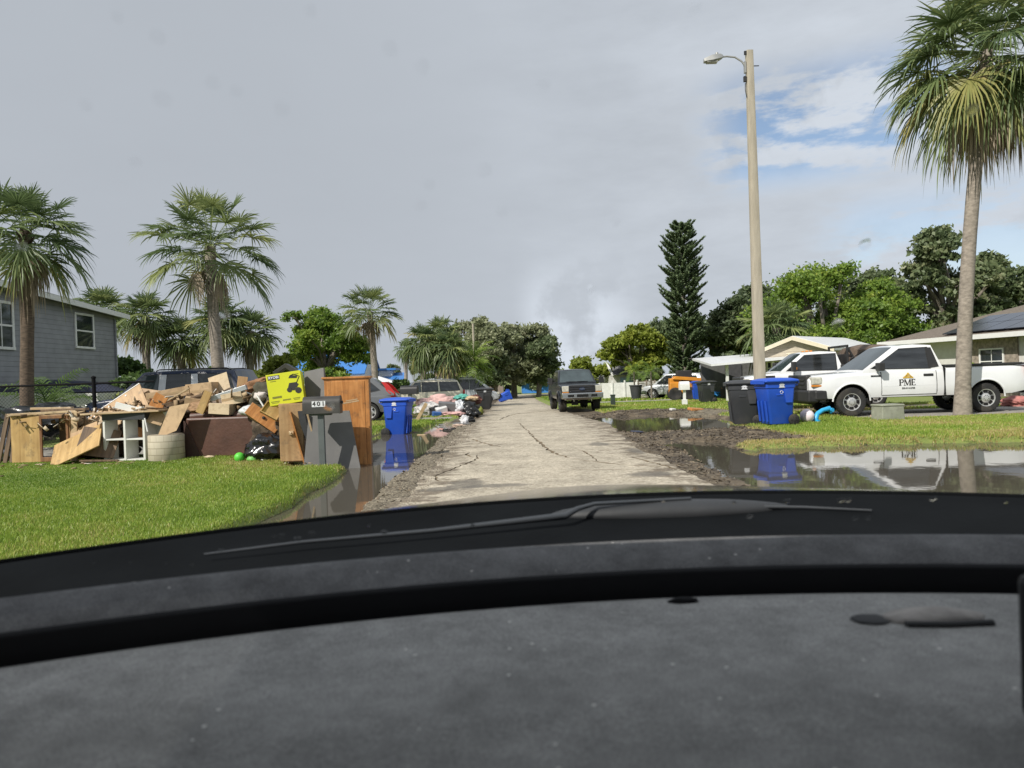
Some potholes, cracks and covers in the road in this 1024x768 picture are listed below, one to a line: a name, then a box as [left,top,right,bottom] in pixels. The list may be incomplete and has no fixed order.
crack [500,405,678,470]
crack [435,439,500,482]
